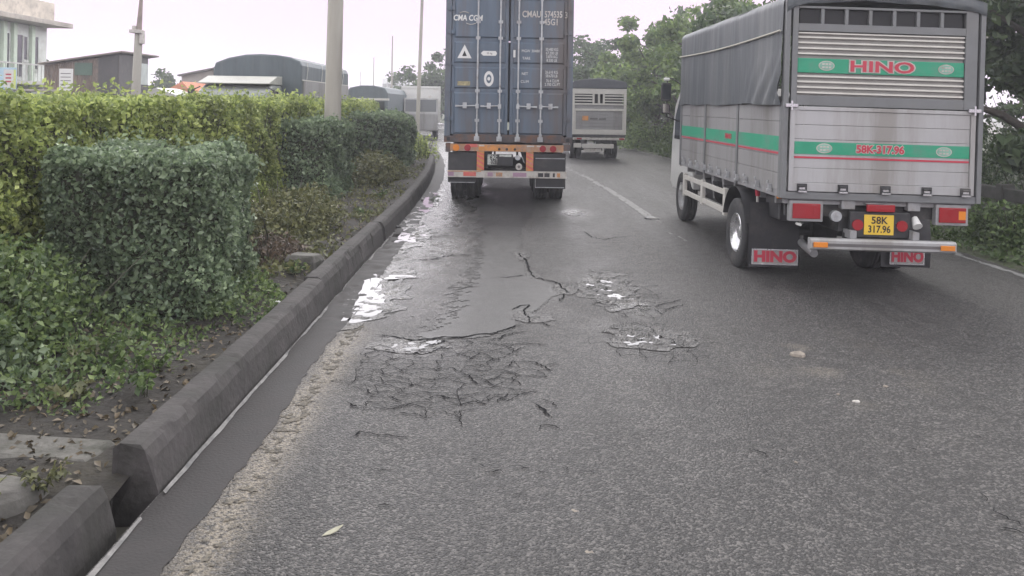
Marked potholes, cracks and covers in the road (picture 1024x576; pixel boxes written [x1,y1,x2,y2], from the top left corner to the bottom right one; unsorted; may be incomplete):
crack [331,304,562,430]
pothole [602,323,700,351]
crack [510,253,713,362]
pothole [576,266,650,312]
crack [981,493,1023,533]
